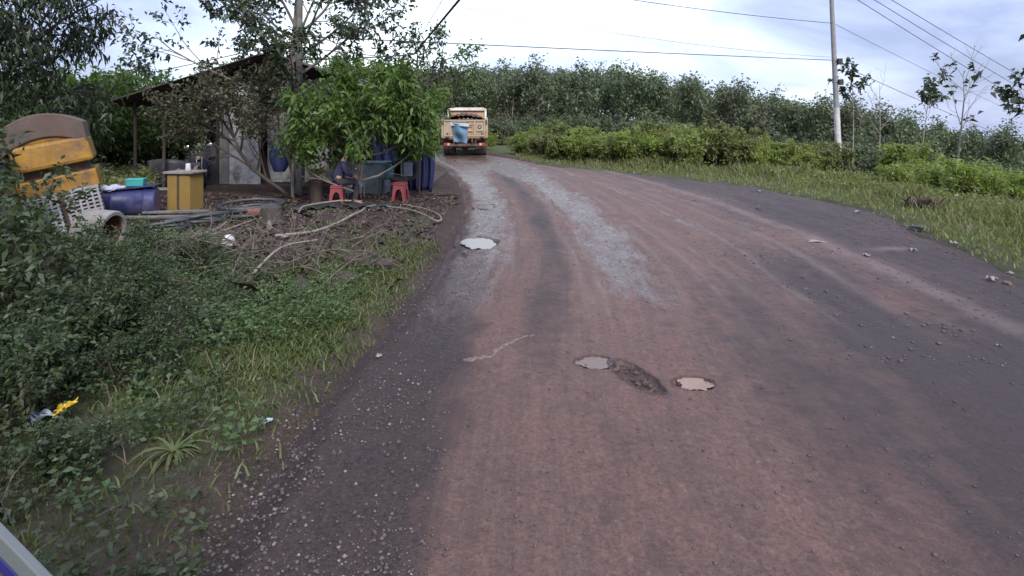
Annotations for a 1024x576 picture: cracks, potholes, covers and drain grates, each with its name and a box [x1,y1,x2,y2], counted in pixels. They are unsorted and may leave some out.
pothole [454,236,503,253]
pothole [670,375,719,392]
crack [463,334,535,362]
pothole [572,354,620,372]
pothole [606,358,672,398]
